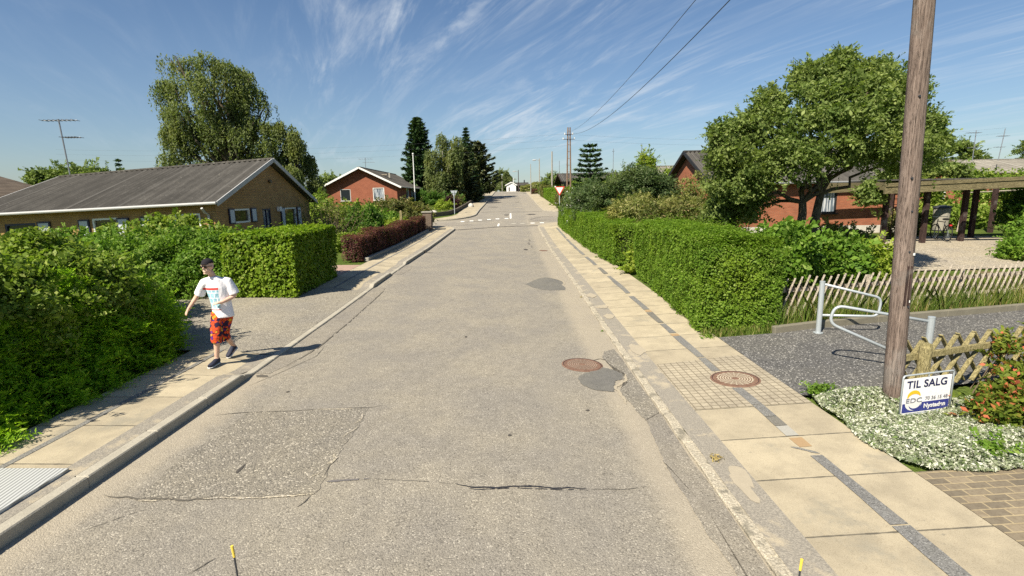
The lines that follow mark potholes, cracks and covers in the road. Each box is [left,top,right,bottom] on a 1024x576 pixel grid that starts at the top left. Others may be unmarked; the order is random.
manhole cover [562,358,603,372]
crack [85,408,586,530]
manhole cover [710,371,761,387]
